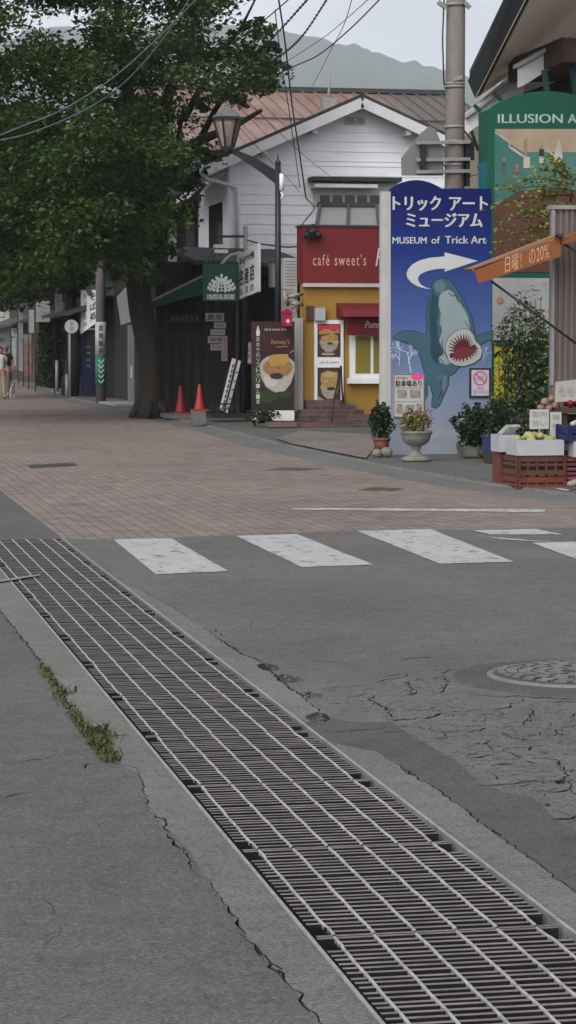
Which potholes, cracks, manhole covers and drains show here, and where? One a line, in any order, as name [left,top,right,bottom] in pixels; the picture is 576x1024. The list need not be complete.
drain grate [145,731,369,789]
drain grate [316,926,576,1024]
drain grate [84,661,257,699]
pothole [305,712,331,723]
drain grate [62,635,218,666]
drain grate [26,593,155,616]
drain grate [188,780,450,855]
drain grate [42,612,183,640]
drain grate [0,563,107,579]
crack [121,580,576,893]
crack [0,609,322,1024]
drain grate [112,692,308,738]
